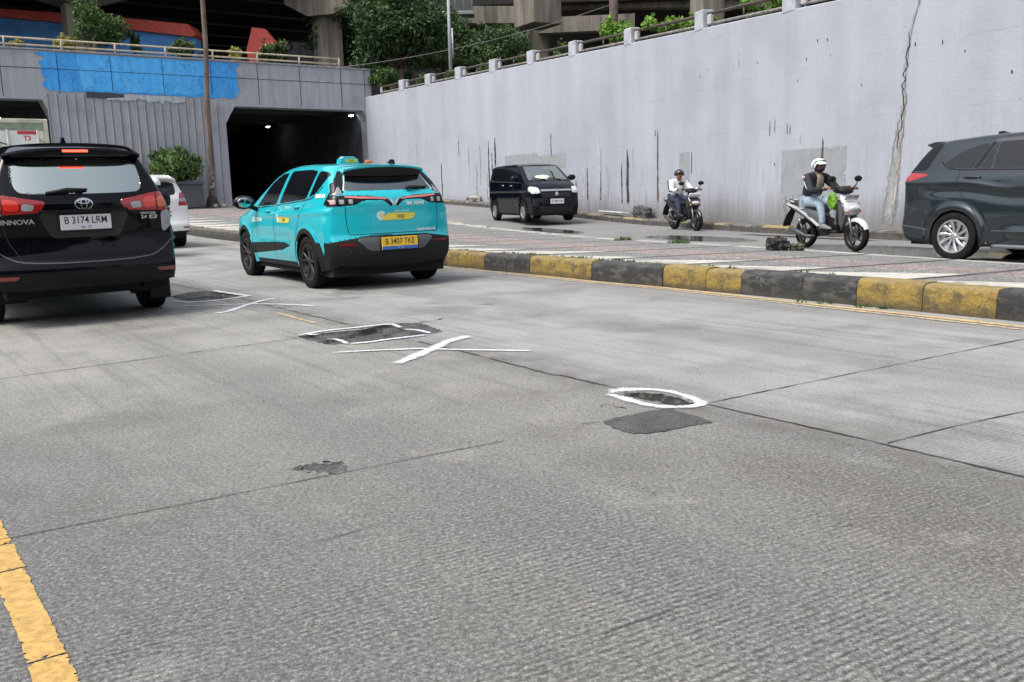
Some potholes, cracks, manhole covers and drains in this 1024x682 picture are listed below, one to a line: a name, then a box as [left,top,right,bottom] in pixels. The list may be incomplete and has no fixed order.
crack [599,585,739,635]
pothole [287,460,348,475]
pothole [624,392,694,406]
pothole [298,323,443,345]
pothole [171,291,239,301]
